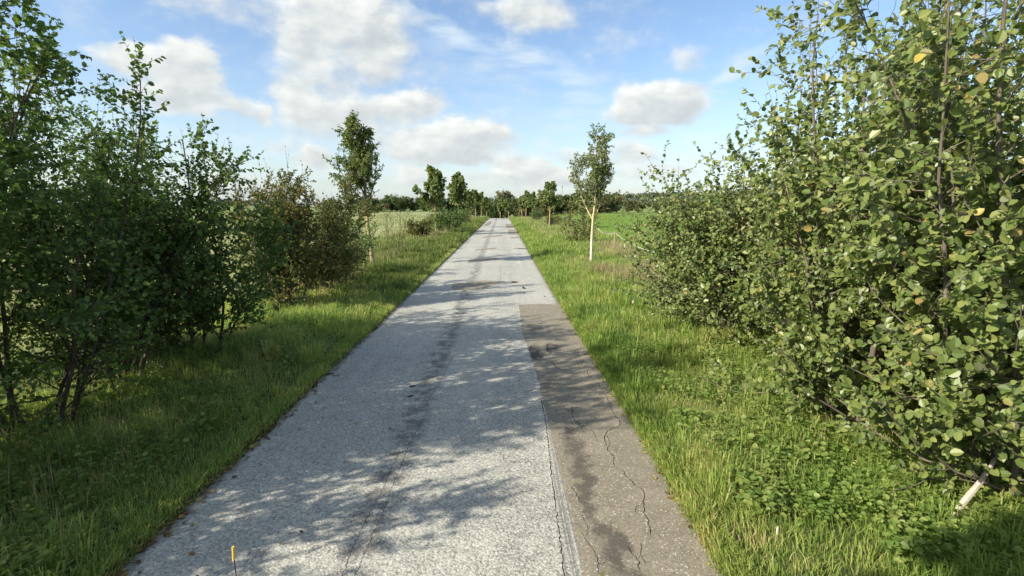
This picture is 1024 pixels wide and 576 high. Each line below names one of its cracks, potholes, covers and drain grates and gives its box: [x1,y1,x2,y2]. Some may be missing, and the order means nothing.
crack [342,453,399,576]
crack [566,370,651,570]
